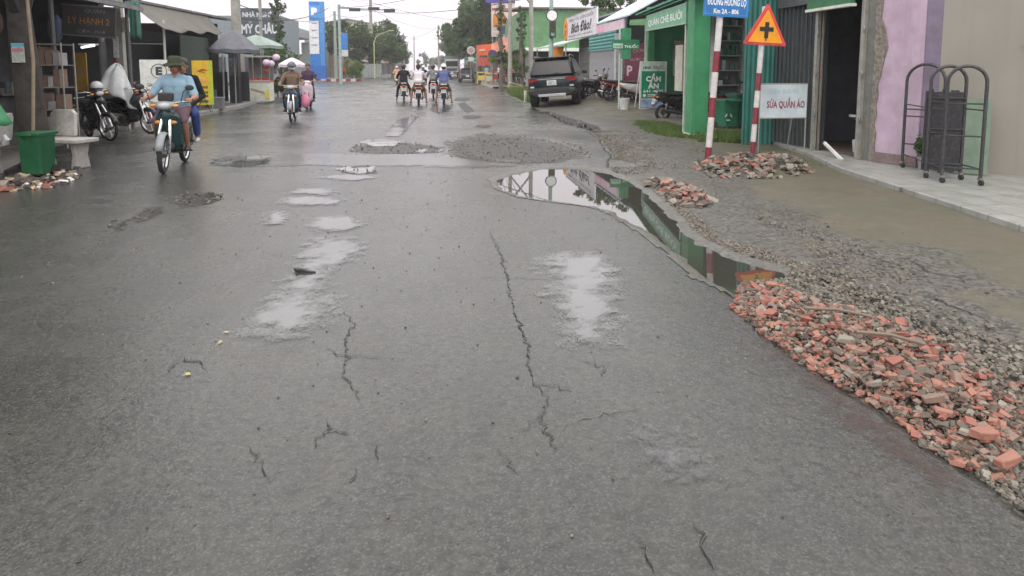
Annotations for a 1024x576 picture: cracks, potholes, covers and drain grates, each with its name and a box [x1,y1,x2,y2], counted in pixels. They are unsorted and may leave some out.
pothole [443,133,590,164]
crack [483,232,635,451]
crack [313,421,348,447]
pothole [130,206,164,223]
pothole [349,142,445,154]
pothole [486,166,797,302]
crack [249,446,270,481]
pothole [174,191,223,206]
crack [163,357,207,375]
pothole [210,154,271,167]
crack [693,524,714,568]
crack [327,313,378,400]
